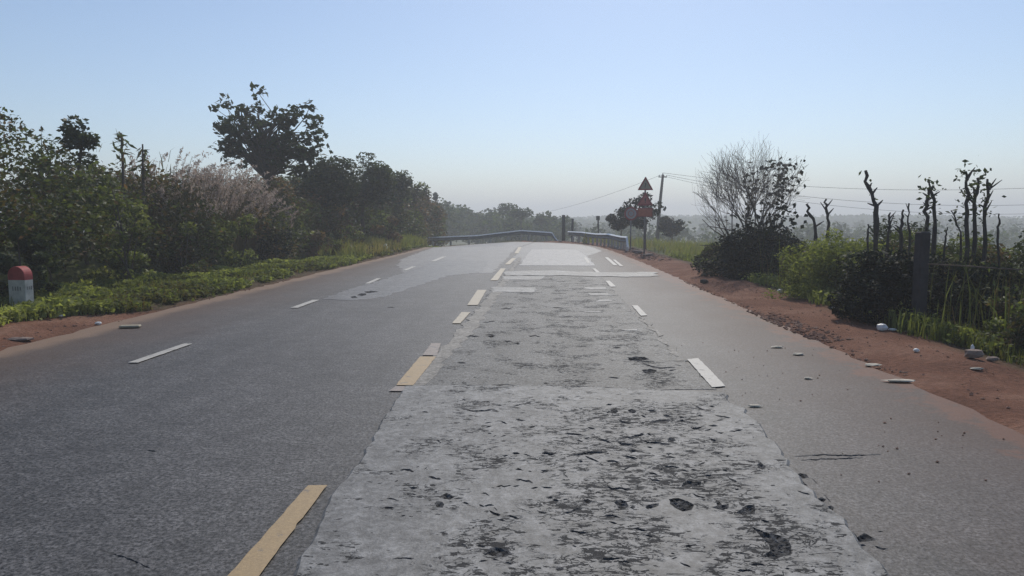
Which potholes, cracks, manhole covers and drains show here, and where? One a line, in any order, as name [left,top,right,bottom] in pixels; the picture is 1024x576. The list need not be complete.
crack [103,550,160,573]
pothole [756,531,791,560]
pothole [669,498,694,511]
